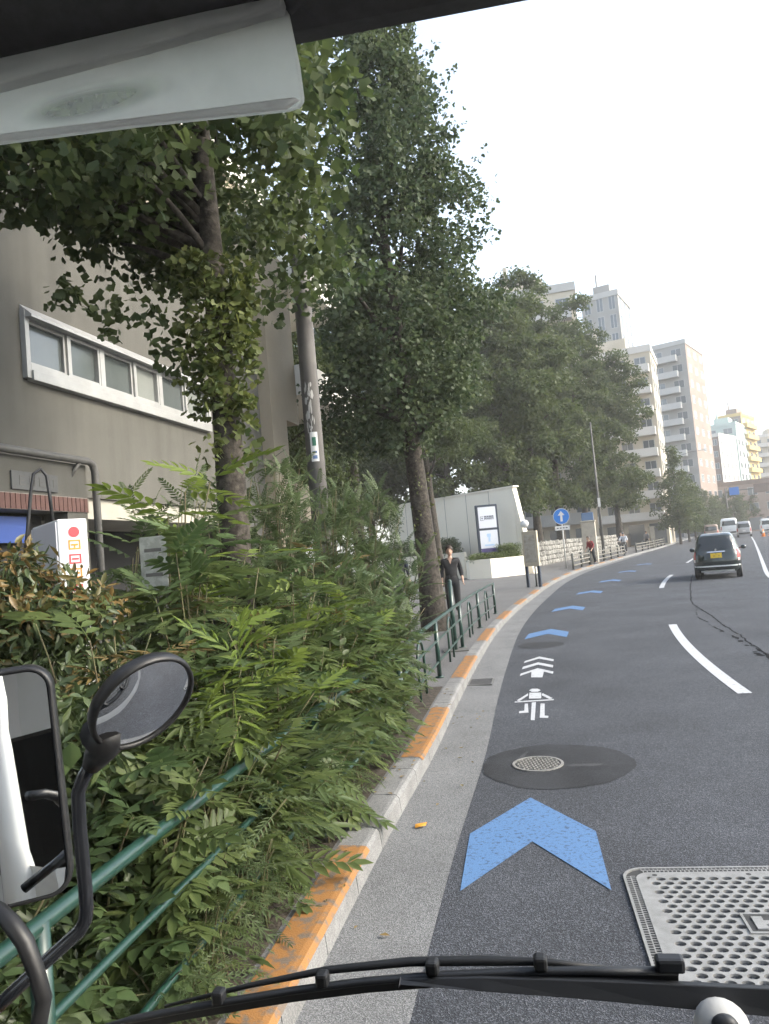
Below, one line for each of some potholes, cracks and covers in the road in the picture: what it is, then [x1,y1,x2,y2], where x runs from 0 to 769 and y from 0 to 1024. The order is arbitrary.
manhole cover [512,756,564,772]
drain grate [467,678,494,686]
crack [689,574,769,659]
manhole cover [623,866,769,985]
